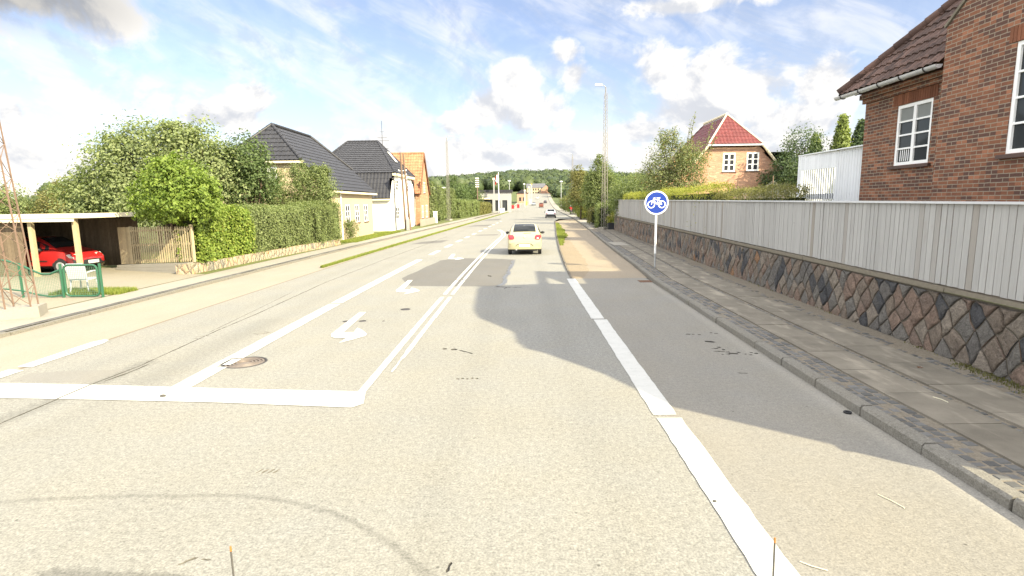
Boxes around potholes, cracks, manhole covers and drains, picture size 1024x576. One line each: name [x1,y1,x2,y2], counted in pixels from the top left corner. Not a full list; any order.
manhole cover [221,356,268,369]
